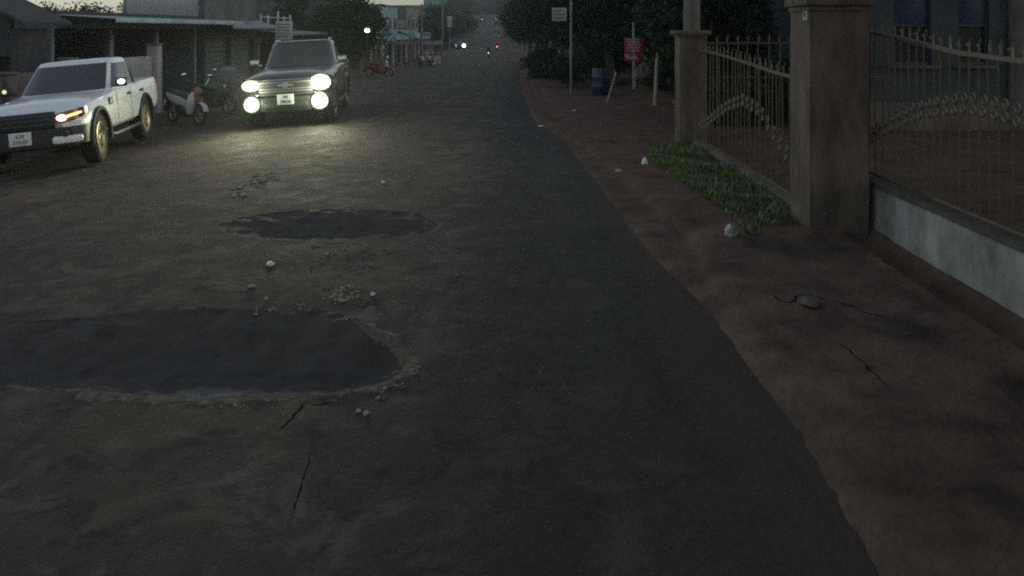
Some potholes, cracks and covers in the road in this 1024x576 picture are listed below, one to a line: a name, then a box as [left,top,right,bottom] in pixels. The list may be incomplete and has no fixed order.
pothole [216,209,442,241]
pothole [0,307,411,403]
crack [278,402,331,532]
crack [758,292,943,393]
